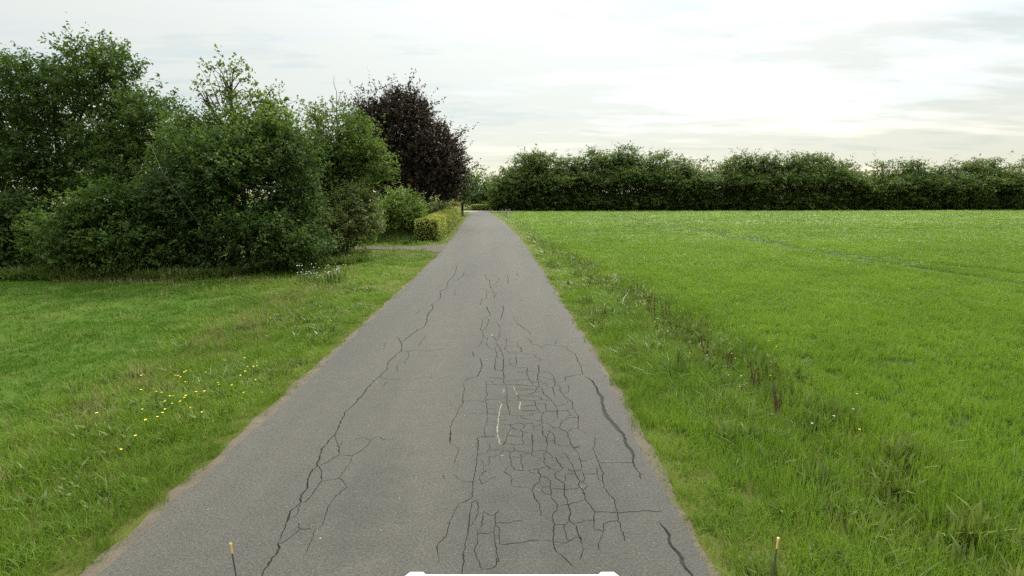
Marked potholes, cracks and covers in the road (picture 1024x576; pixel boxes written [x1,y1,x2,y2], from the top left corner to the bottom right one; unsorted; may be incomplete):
crack [436,274,693,576]
crack [261,267,463,576]
